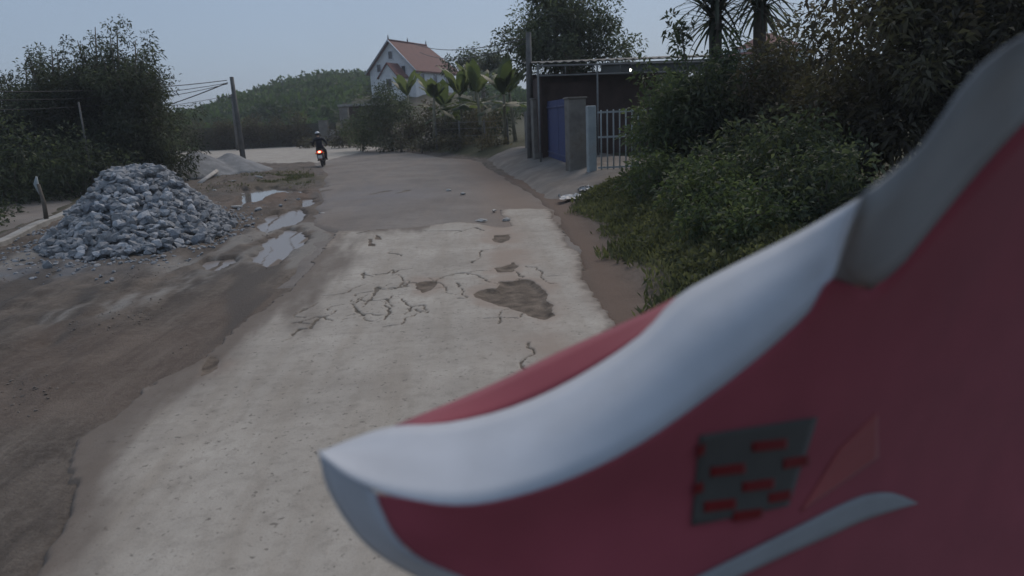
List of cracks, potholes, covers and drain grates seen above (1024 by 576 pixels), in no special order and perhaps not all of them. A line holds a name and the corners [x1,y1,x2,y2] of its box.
pothole [494,262,518,273]
pothole [492,235,511,243]
crack [520,343,535,369]
pothole [473,279,555,320]
crack [291,251,490,336]
pothole [416,281,437,293]
